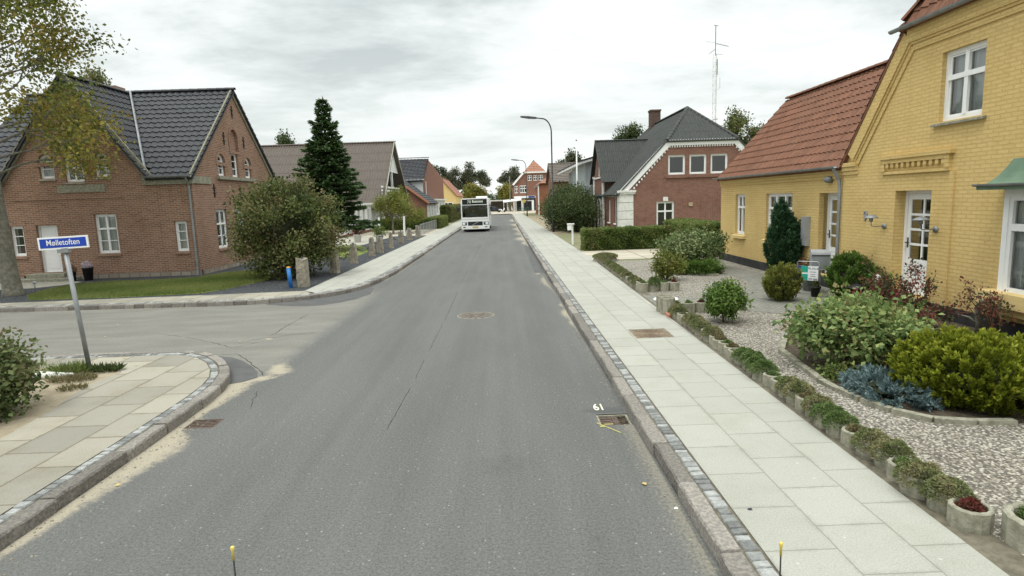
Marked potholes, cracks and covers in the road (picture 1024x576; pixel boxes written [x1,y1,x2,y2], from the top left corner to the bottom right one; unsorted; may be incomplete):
drain grate [596,414,632,425]
drain grate [183,419,224,429]
crack [164,314,318,375]
manhole cover [626,328,676,339]
